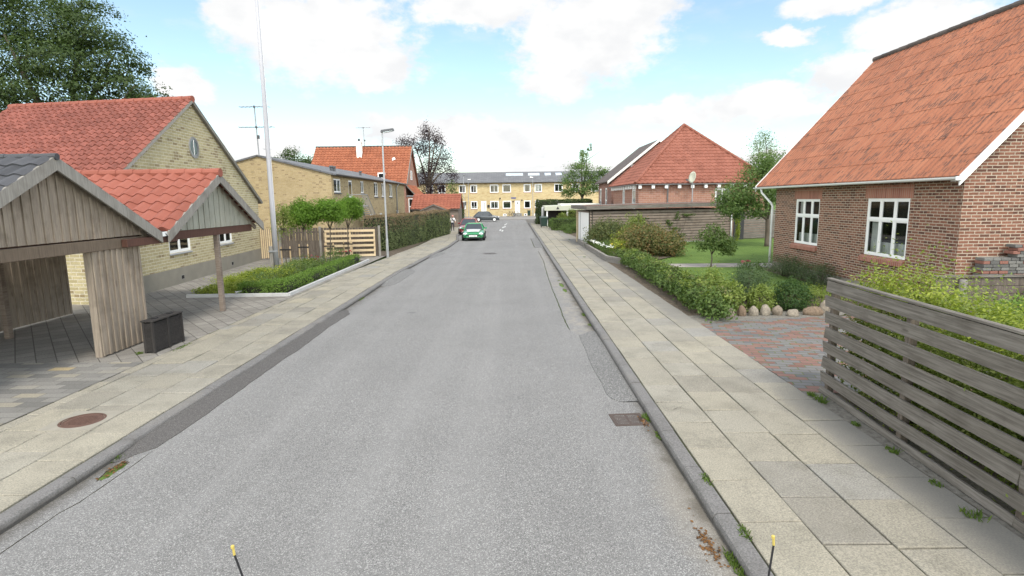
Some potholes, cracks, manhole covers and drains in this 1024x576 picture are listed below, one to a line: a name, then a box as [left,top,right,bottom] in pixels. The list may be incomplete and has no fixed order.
manhole cover [36,411,125,432]
drain grate [609,413,649,426]
